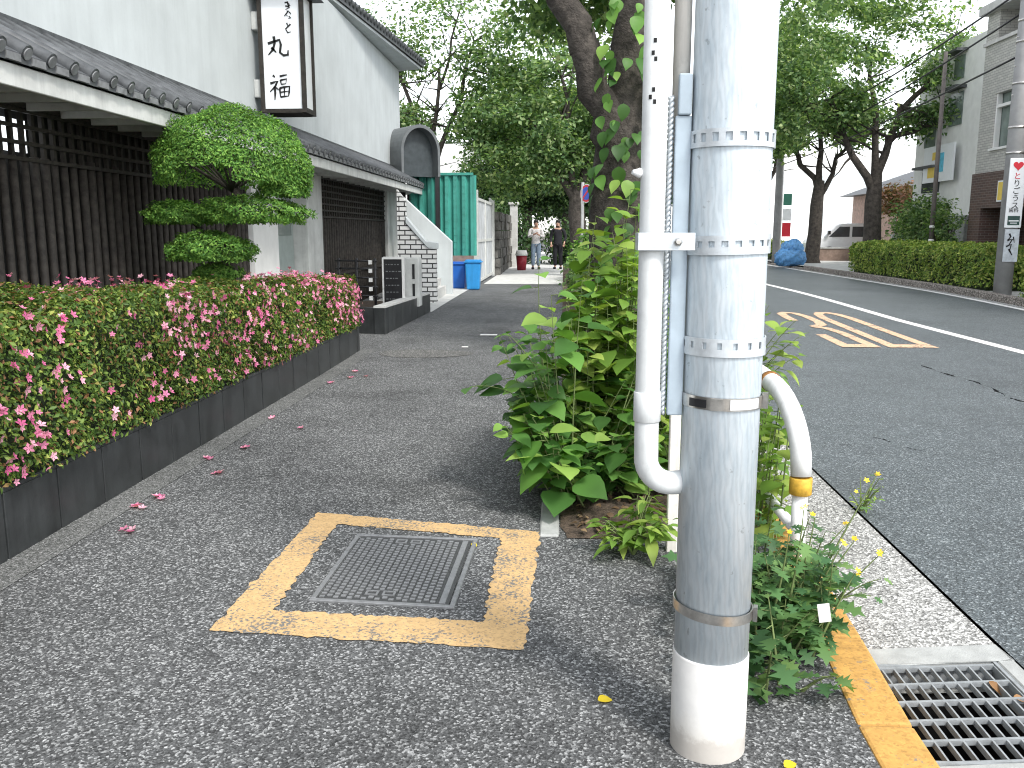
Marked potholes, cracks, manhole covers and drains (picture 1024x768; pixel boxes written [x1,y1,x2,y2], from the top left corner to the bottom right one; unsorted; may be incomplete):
manhole cover [309,534,478,609]
drain grate [868,644,1024,768]
crack [921,365,1024,402]
